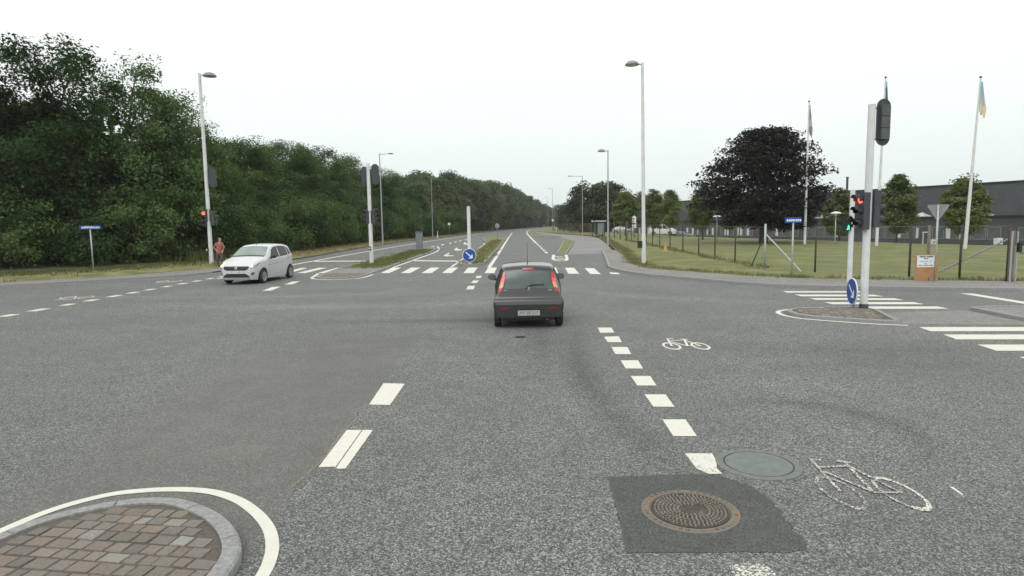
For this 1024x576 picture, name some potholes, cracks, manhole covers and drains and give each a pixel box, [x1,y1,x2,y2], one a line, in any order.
manhole cover [715,449,803,481]
manhole cover [641,490,741,534]
